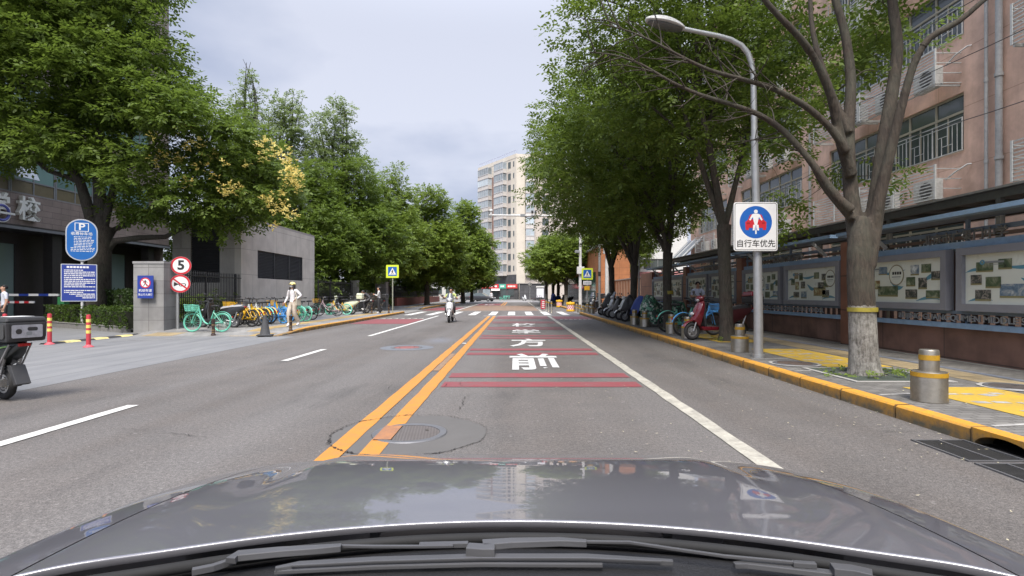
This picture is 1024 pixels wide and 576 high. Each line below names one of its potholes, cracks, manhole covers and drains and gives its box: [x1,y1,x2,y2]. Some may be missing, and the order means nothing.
drain grate [974,462,1024,483]
drain grate [911,439,1024,462]
crack [327,383,488,455]
manhole cover [330,416,487,454]
